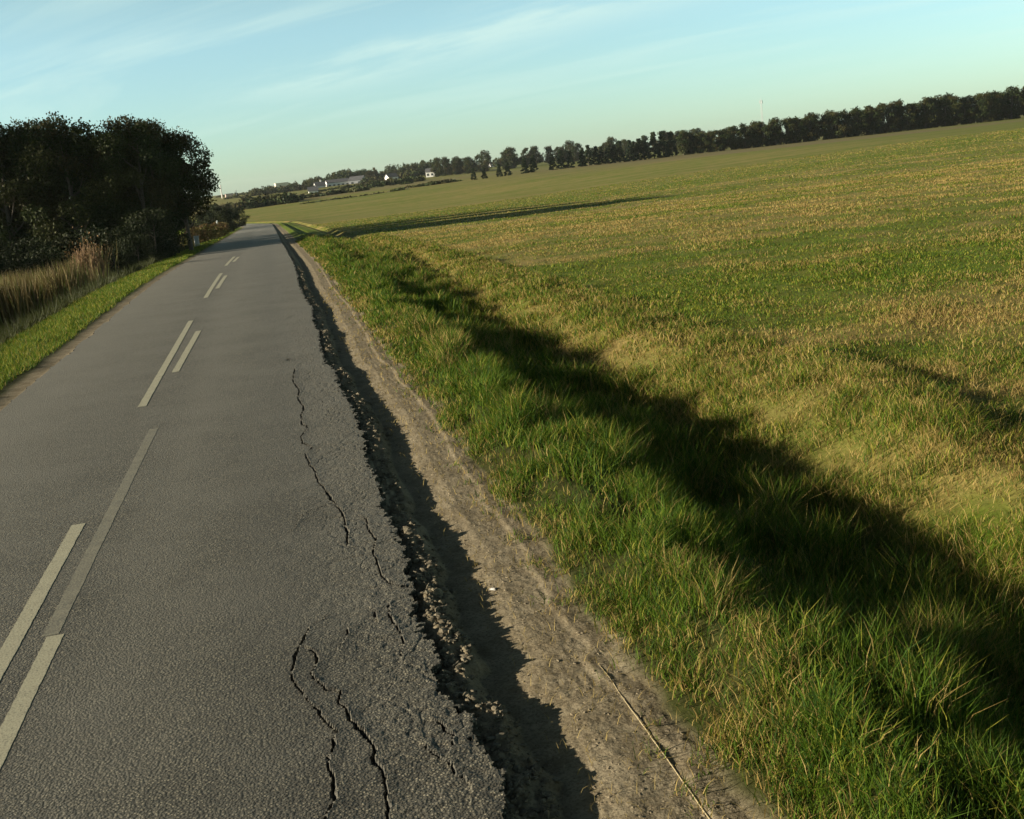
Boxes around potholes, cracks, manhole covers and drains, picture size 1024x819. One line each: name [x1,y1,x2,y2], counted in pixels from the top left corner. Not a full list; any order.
crack [285,358,410,819]
